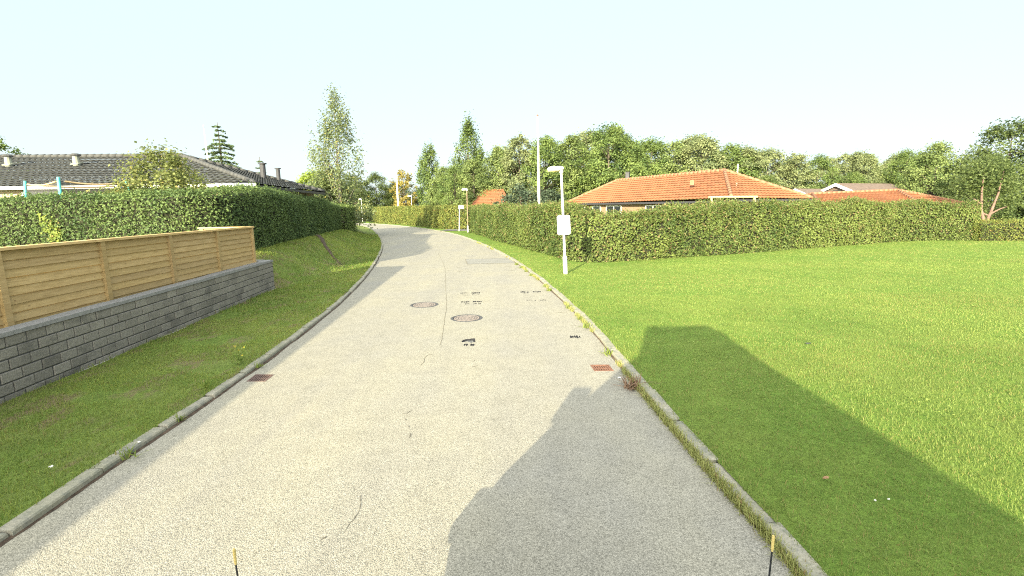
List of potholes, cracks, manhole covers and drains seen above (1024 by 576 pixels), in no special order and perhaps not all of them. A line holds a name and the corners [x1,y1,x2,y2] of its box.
drain grate [246,374,274,382]
manhole cover [451,314,483,322]
